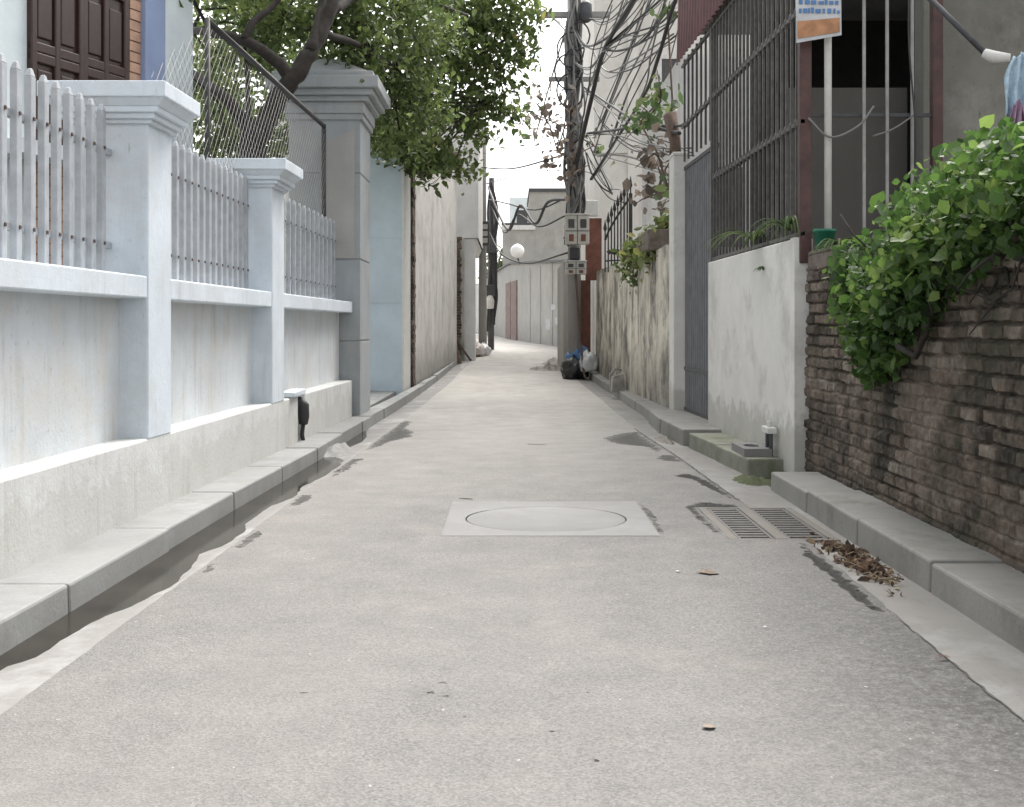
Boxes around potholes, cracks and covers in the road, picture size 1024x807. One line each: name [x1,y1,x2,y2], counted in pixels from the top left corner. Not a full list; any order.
drain grate [698,507,841,543]
manhole cover [441,501,660,536]
